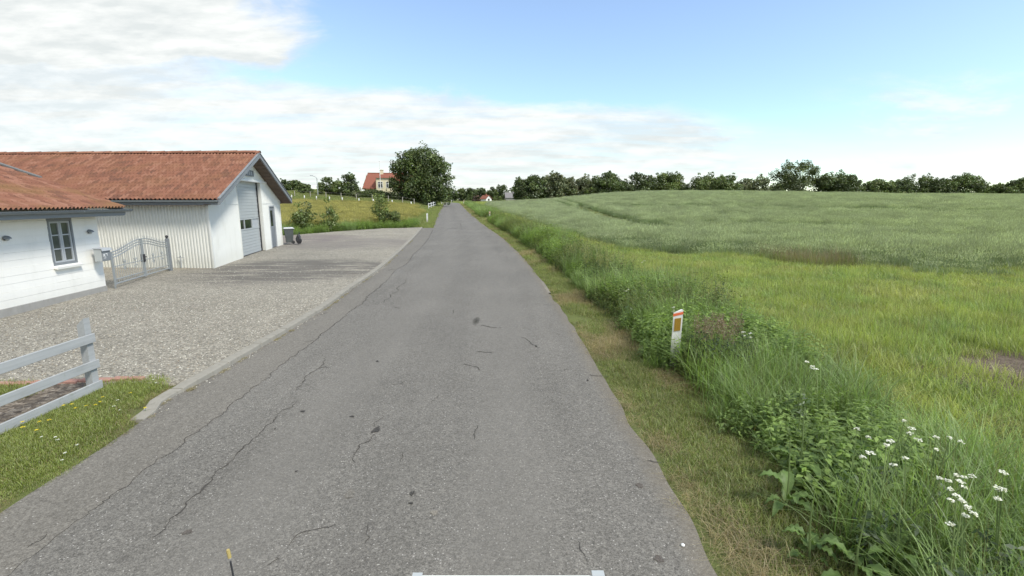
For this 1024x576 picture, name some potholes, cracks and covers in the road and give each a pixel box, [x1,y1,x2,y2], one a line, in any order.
crack [152,360,329,539]
